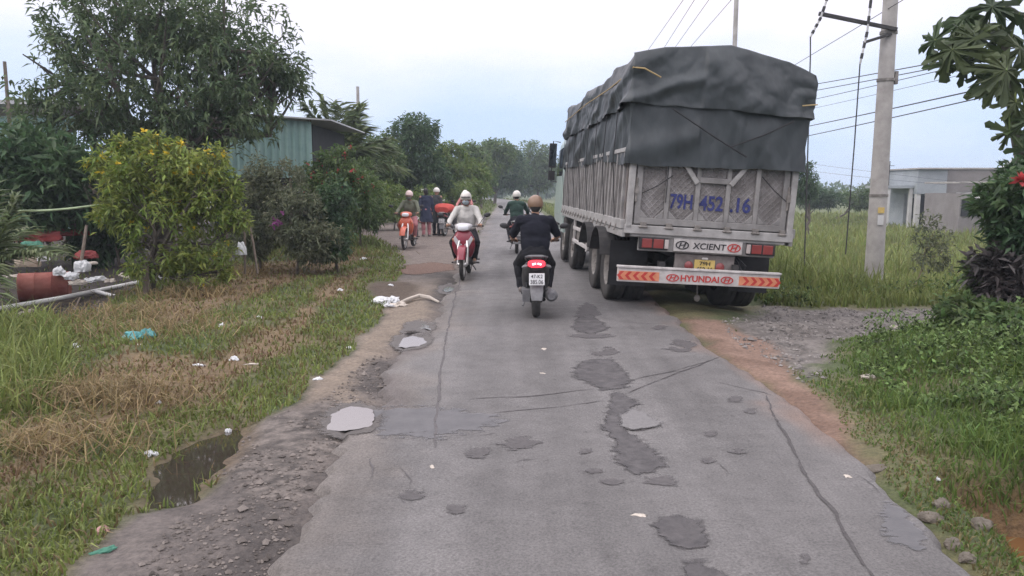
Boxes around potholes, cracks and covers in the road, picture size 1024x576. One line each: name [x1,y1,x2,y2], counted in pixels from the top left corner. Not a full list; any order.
crack [472,388,602,412]
crack [628,355,879,576]
